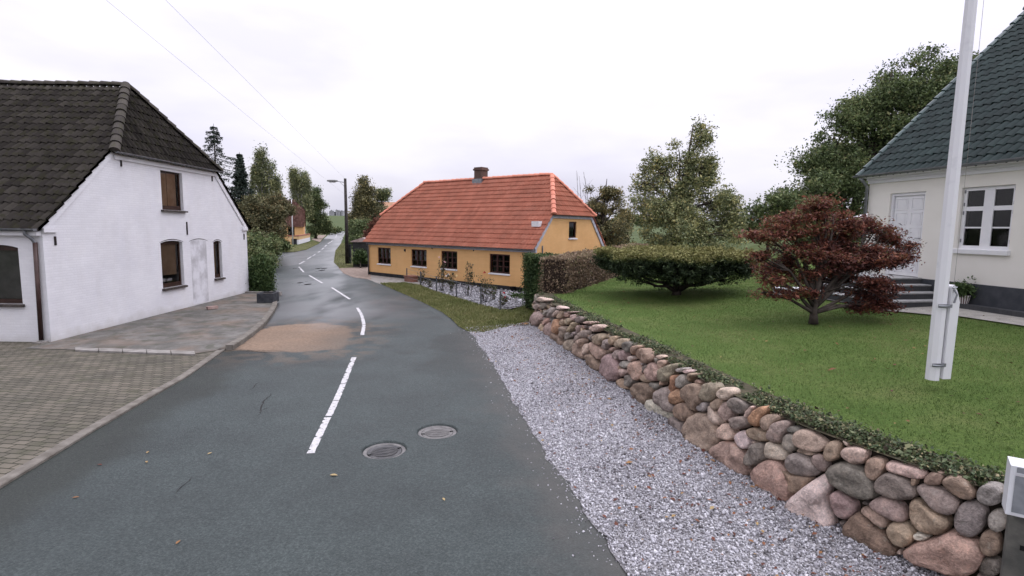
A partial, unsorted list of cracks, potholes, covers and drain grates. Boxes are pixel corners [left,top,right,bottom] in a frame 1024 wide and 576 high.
manhole cover [399,418,476,446]
manhole cover [342,434,426,468]
